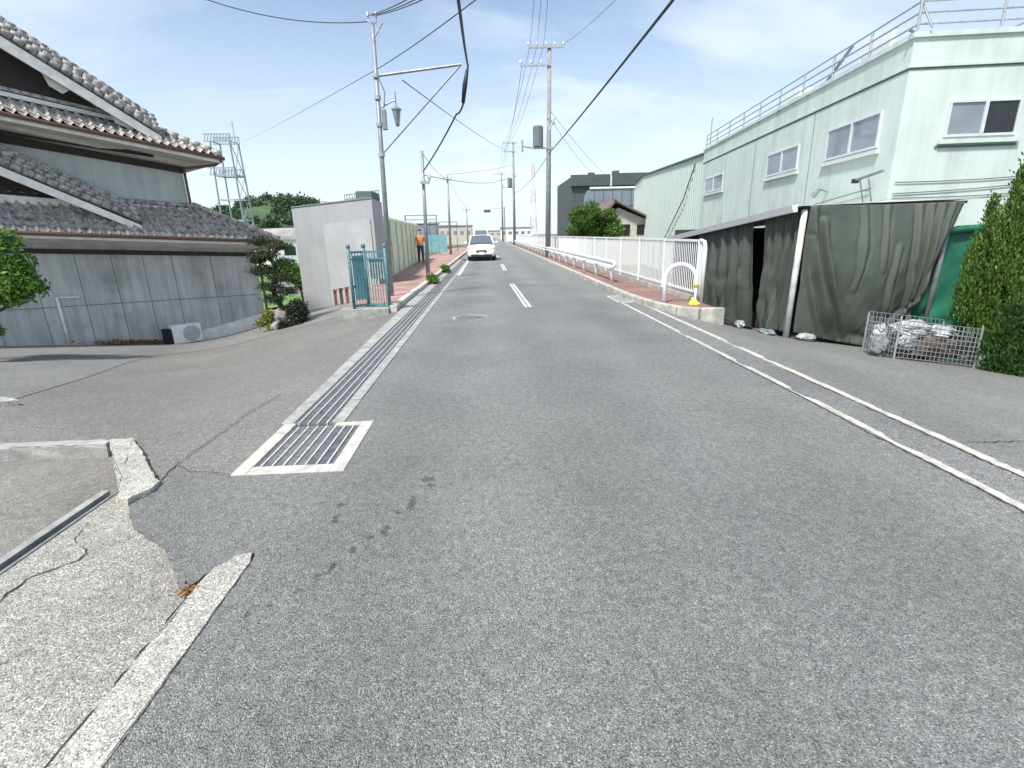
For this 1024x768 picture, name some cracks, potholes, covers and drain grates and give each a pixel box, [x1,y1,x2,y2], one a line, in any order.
crack [160,393,281,481]
drain grate [231,421,374,476]
crack [0,522,88,601]
